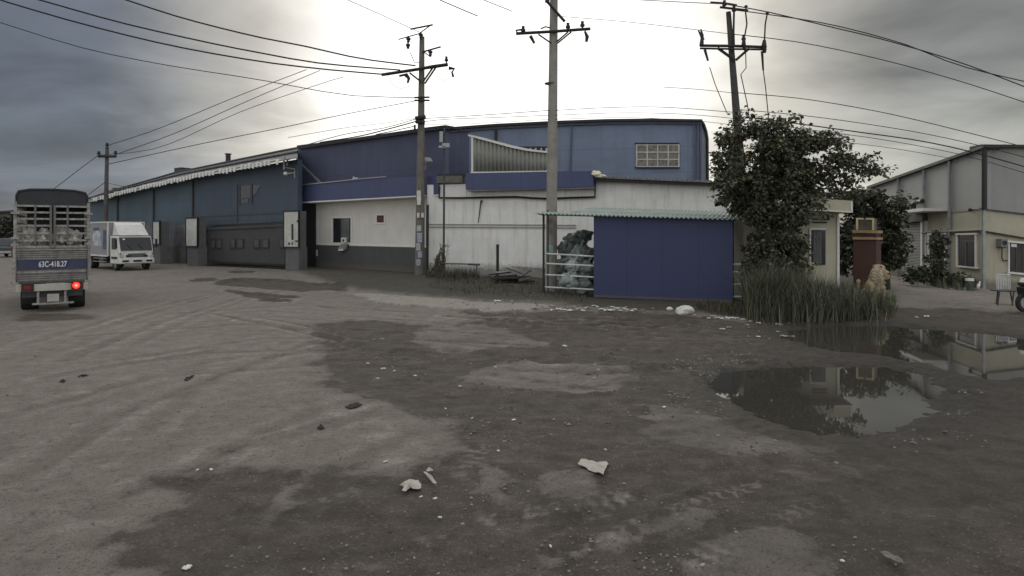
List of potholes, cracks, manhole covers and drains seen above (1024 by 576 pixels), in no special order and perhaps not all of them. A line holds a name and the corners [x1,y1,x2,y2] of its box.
pothole [672,357,995,450]
